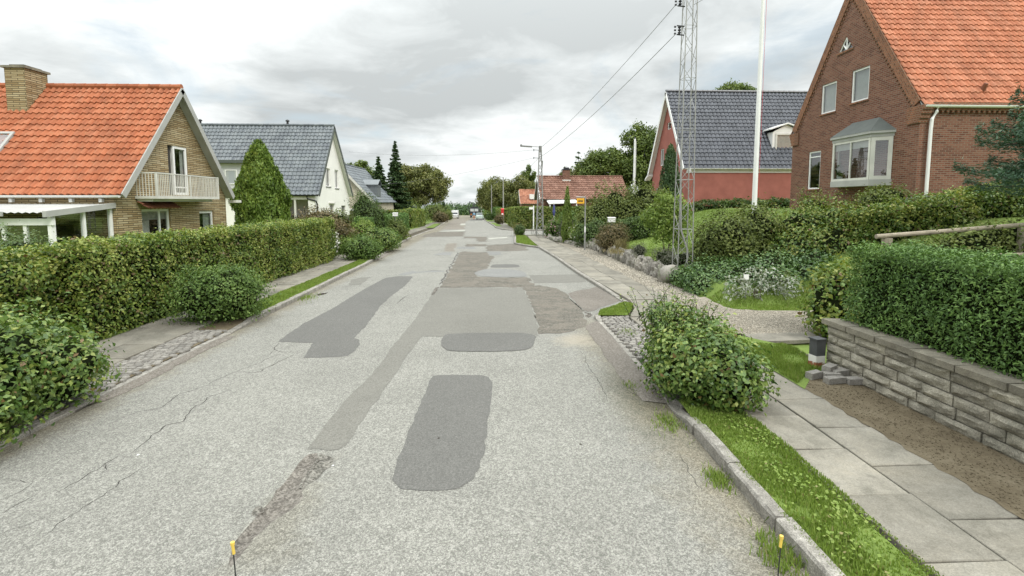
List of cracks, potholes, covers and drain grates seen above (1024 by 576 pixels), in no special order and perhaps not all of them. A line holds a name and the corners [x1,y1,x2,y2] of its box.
crack [3,344,297,535]
